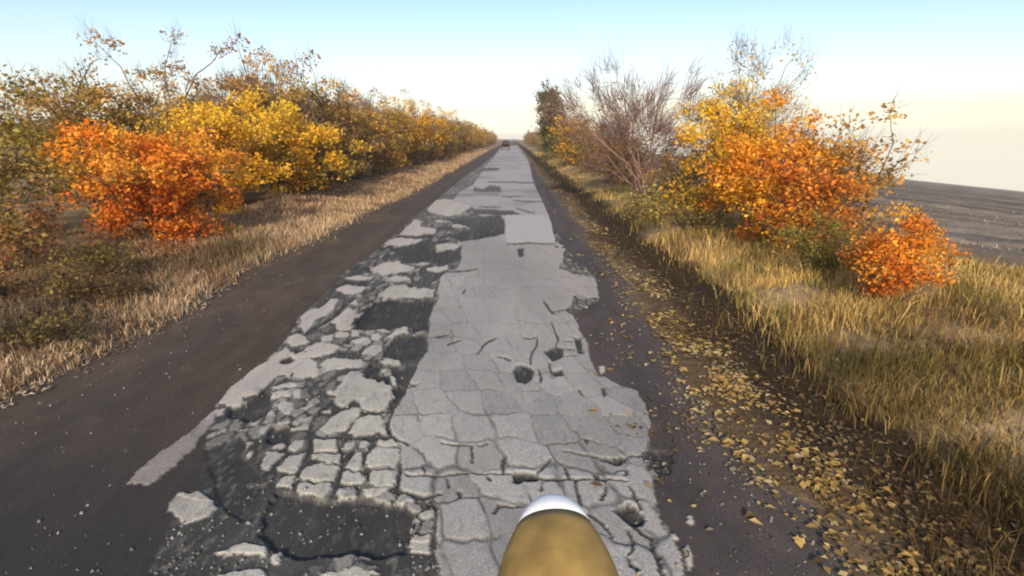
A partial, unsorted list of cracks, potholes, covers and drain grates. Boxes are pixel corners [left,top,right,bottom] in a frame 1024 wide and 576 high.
crack [479,181,560,214]
crack [535,450,667,576]
crack [312,282,370,330]
pothole [544,346,564,362]
pothole [356,299,436,332]
pothole [441,215,505,242]
pothole [258,490,417,561]
crack [292,401,511,562]
pothole [383,334,428,360]
pothole [513,364,535,384]
